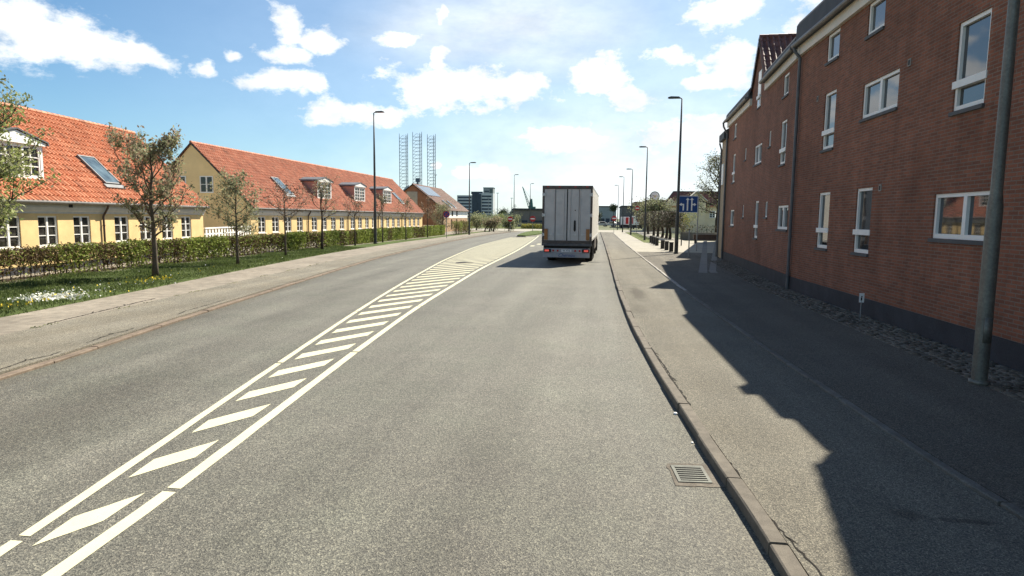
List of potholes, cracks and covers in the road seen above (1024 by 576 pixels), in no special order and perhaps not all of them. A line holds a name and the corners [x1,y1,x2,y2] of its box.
crack [648,342,691,405]
crack [770,518,823,576]
drain grate [667,463,726,488]
